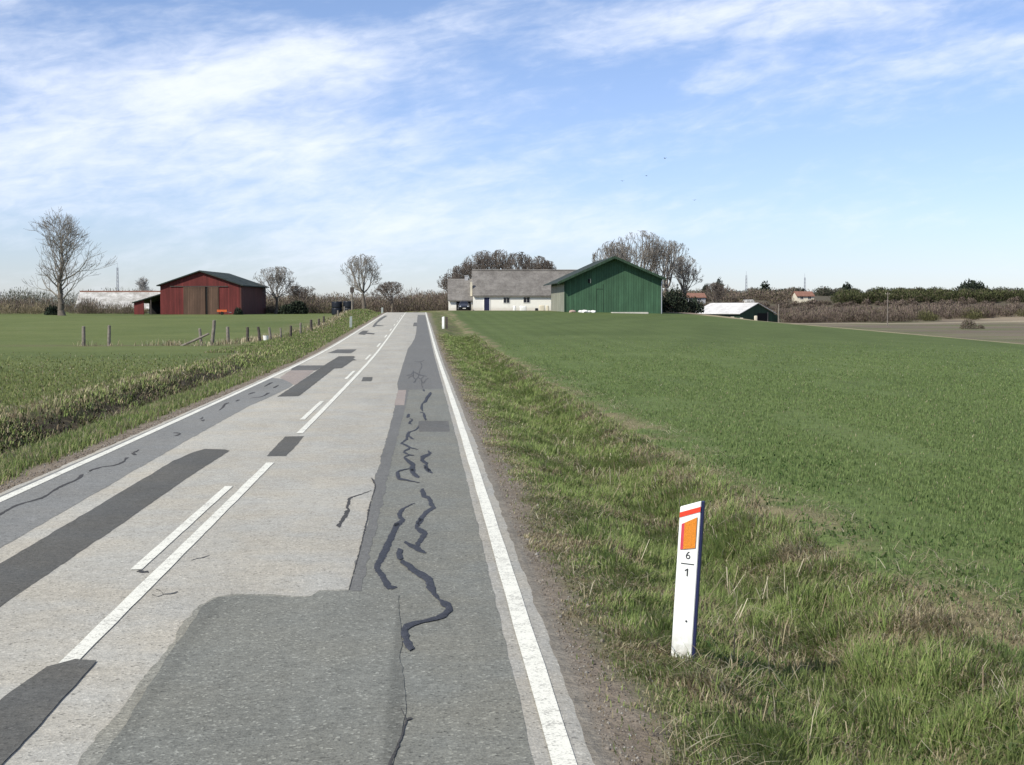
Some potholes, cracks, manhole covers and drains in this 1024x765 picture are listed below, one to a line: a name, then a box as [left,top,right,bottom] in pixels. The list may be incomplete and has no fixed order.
crack [336,479,376,589]
crack [406,360,428,388]
crack [388,709,412,765]
